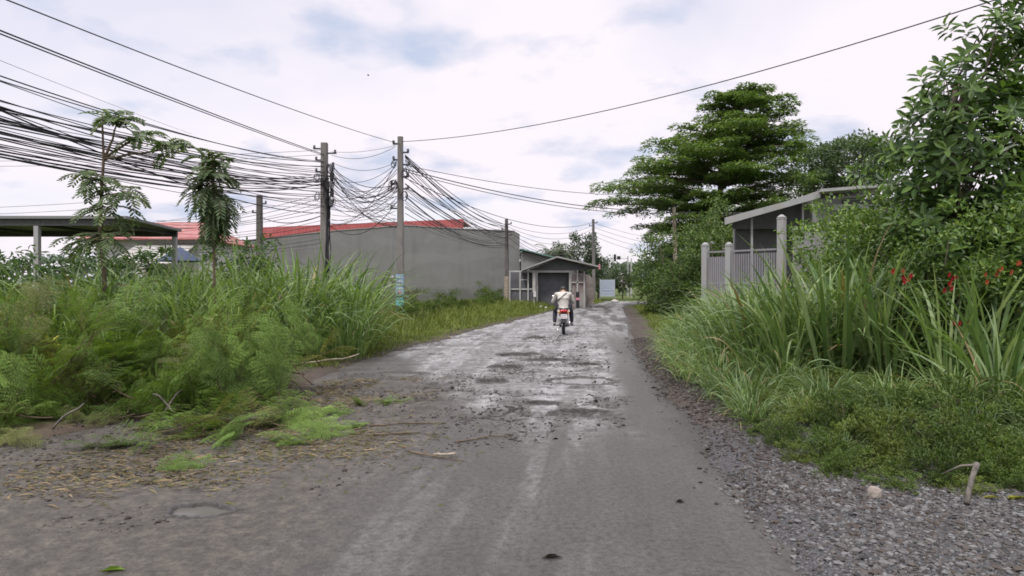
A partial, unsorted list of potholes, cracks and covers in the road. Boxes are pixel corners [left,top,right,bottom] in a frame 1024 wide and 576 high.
pothole [541,375,622,387]
pothole [164,501,240,519]
pothole [543,408,615,417]
